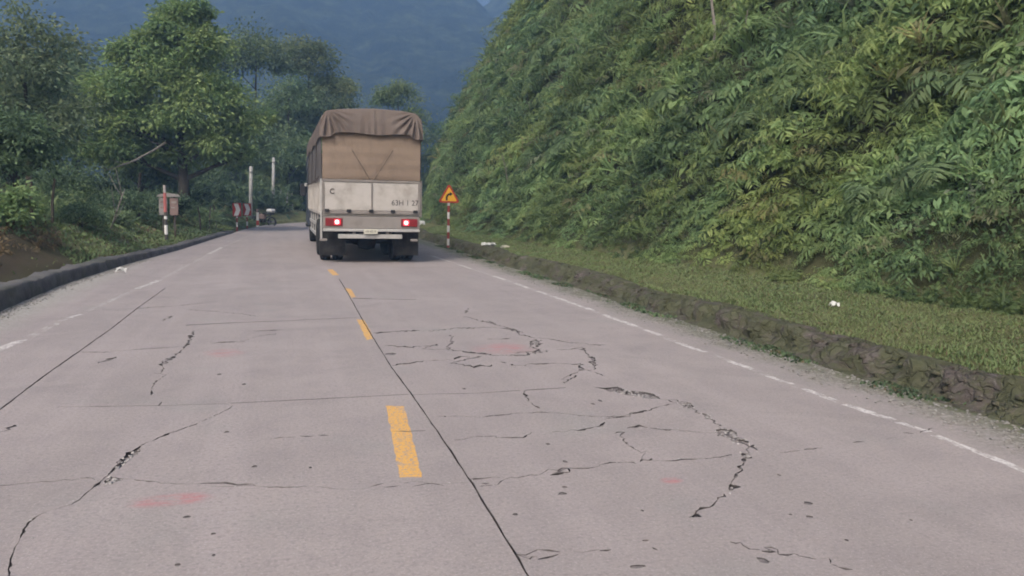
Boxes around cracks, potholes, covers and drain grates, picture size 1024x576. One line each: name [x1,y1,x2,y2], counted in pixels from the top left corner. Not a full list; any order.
crack [110,331,195,406]
crack [439,391,757,518]
crack [0,406,467,576]
crack [731,542,853,570]
crack [377,310,603,383]
